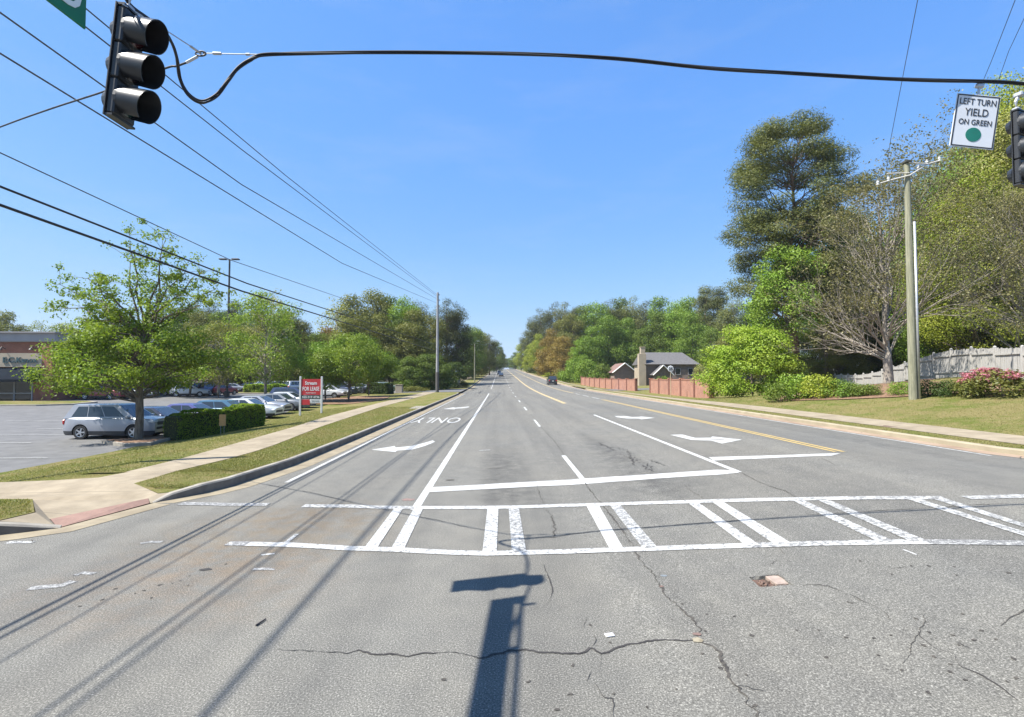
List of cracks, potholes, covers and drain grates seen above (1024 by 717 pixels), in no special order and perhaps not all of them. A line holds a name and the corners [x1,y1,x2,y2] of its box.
crack [902,614,1016,699]
crack [274,619,688,712]
crack [600,443,665,470]
